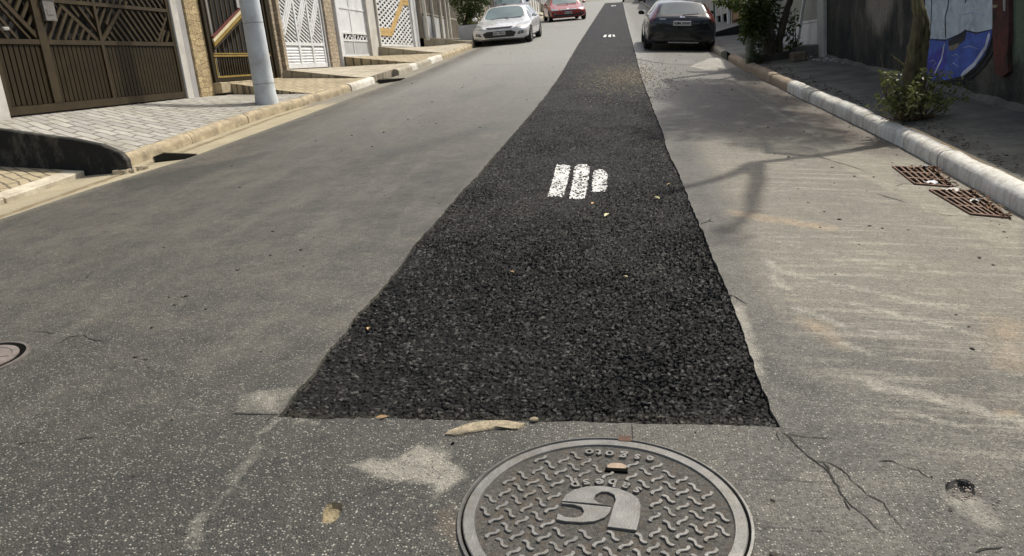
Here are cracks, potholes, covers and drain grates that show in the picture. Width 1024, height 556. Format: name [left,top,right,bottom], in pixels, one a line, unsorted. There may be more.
manhole cover [0,341,31,370]
manhole cover [457,436,755,556]
pothole [945,479,975,500]
drain grate [929,189,1011,219]
crack [740,431,909,540]
drain grate [892,166,954,188]
